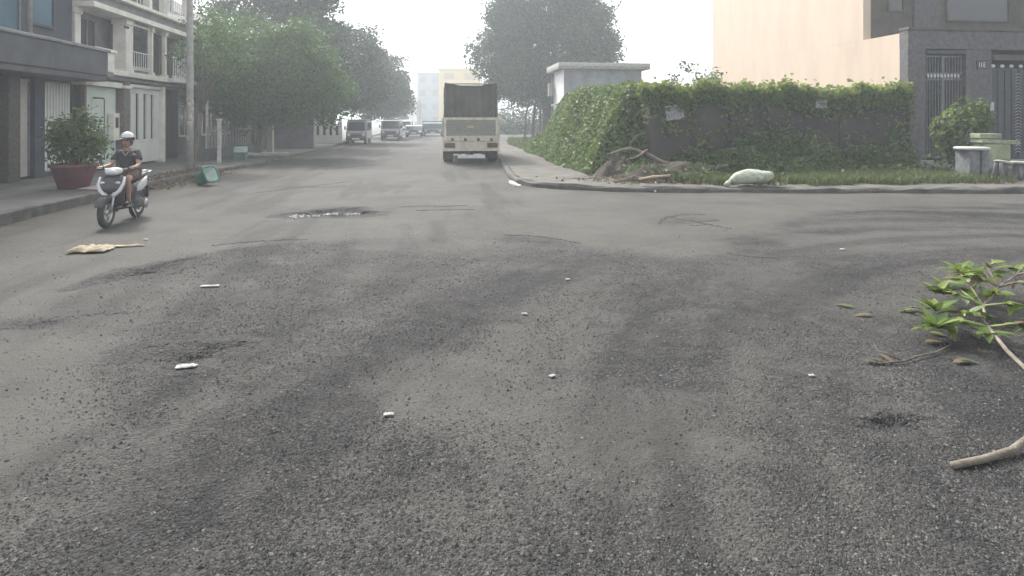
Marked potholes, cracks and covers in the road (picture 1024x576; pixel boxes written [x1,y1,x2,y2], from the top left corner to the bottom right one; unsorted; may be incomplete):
crack [212,237,307,246]
crack [505,234,577,243]
crack [658,214,731,229]
pothole [270,206,388,219]
